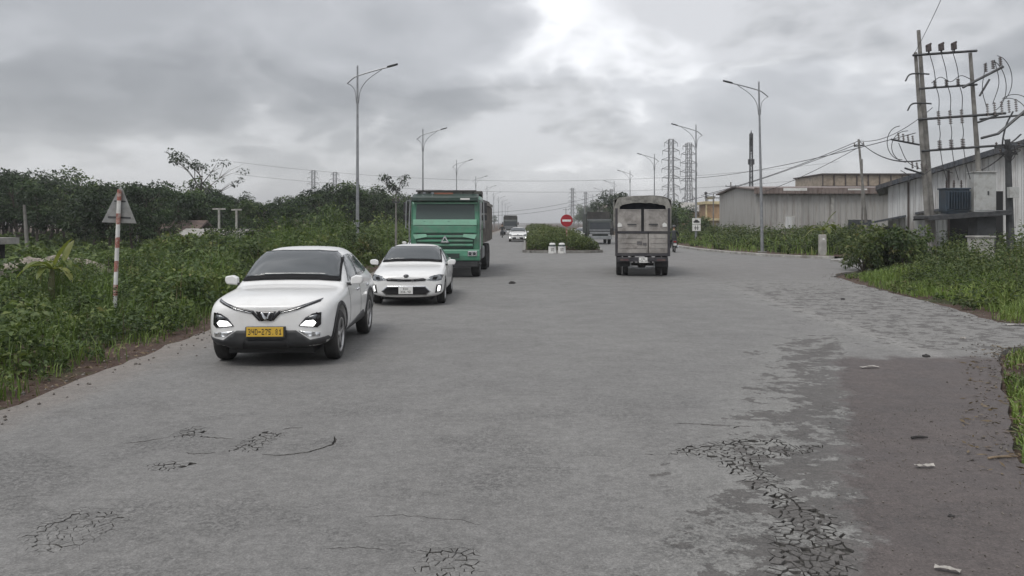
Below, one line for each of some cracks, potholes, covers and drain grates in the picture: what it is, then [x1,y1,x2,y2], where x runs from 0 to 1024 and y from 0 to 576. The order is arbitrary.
crack [648,423,859,576]
crack [130,426,337,472]
